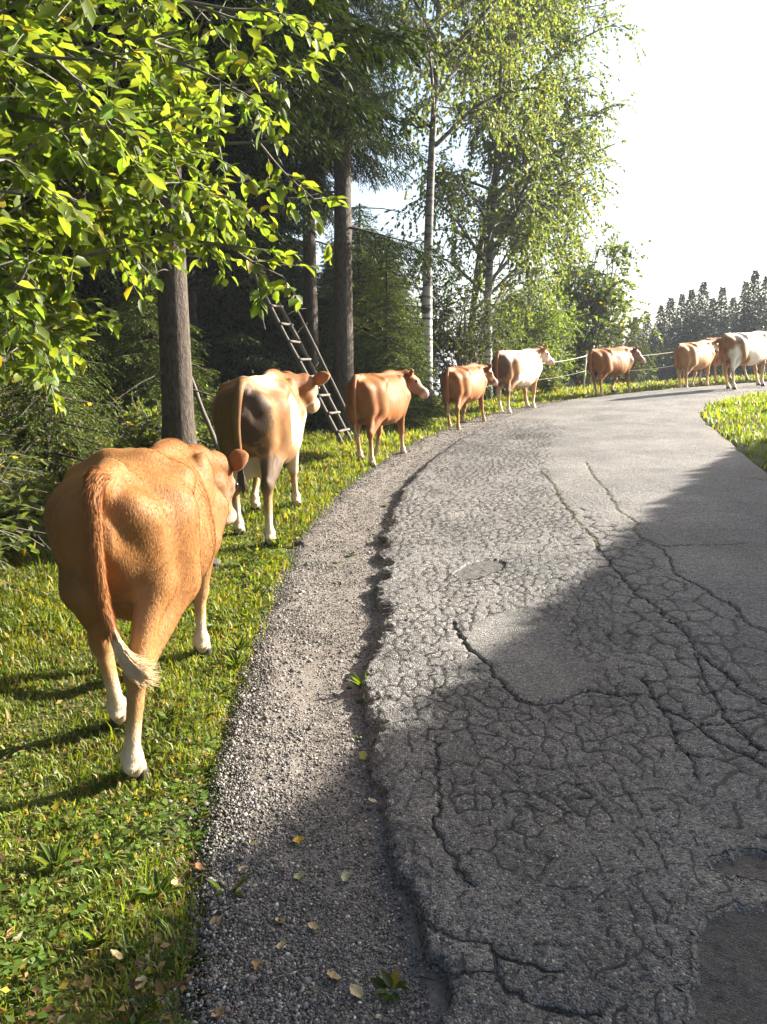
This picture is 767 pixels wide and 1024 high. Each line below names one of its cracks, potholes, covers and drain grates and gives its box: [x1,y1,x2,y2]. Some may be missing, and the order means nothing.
crack [367,418,767,1024]
pothole [451,558,509,580]
pothole [705,845,767,882]
